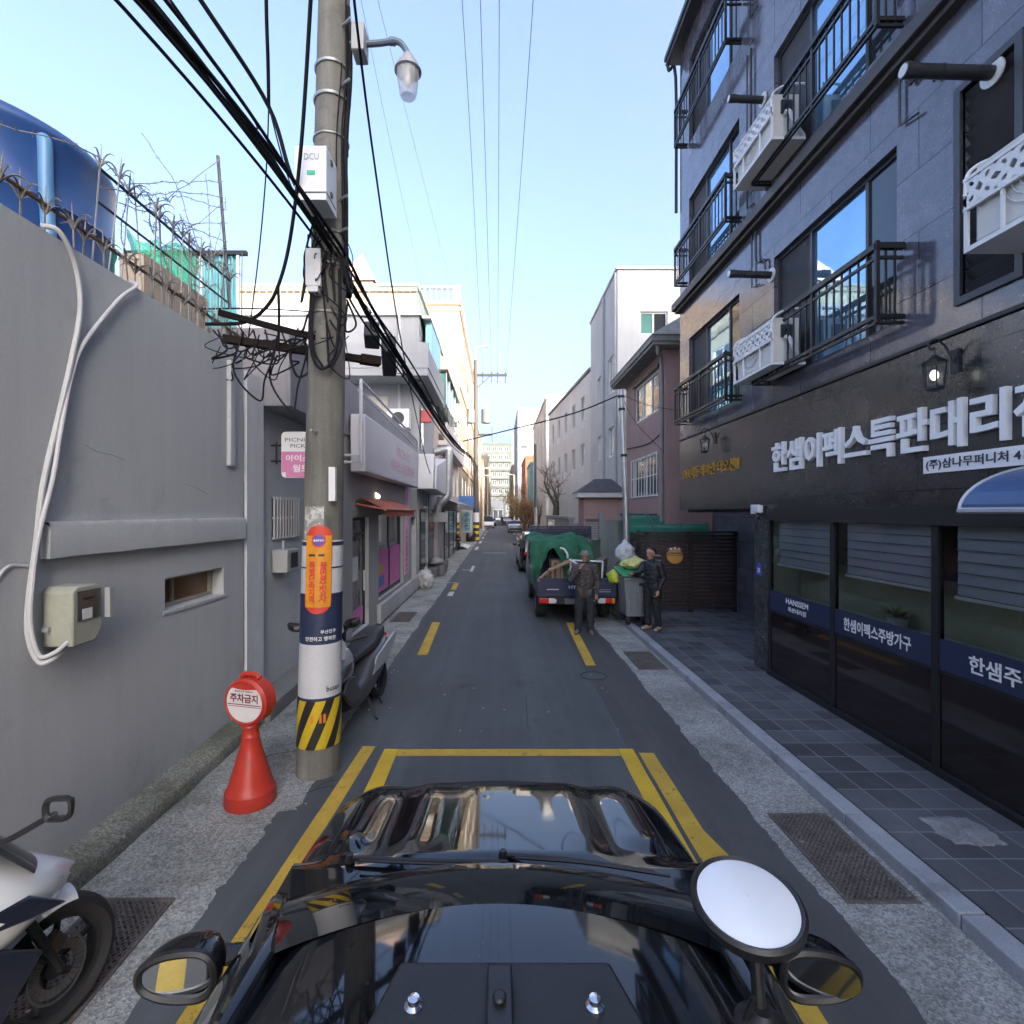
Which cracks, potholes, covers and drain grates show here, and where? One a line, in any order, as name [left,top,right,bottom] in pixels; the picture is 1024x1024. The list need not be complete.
manhole cover [580,671,607,680]
drain grate [390,612,417,622]
drain grate [767,813,922,904]
drain grate [623,651,668,669]
drain grate [7,898,176,1024]
